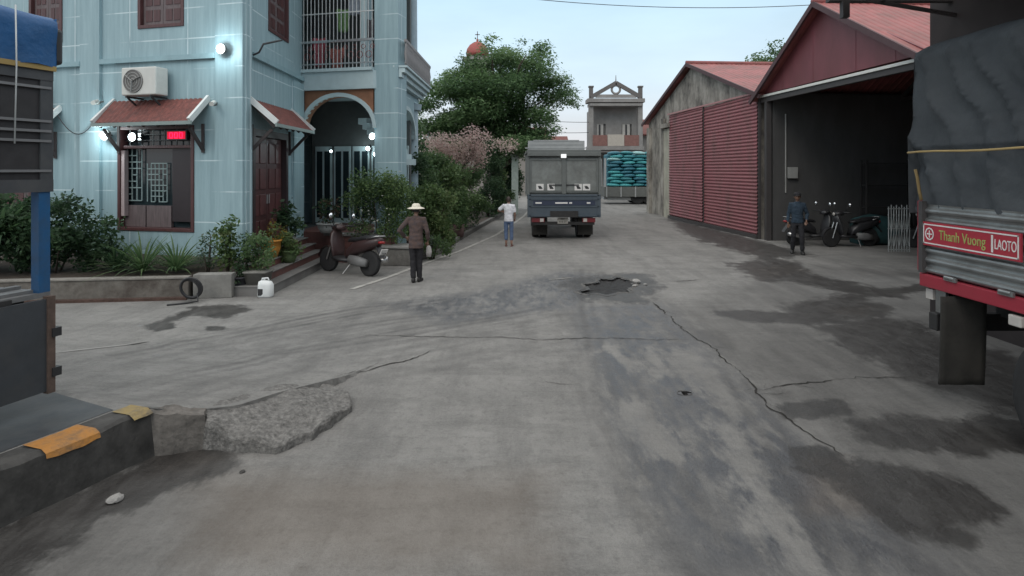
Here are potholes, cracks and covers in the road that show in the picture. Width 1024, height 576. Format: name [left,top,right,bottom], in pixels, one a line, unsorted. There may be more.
crack [655,304,883,452]
pothole [574,275,638,296]
